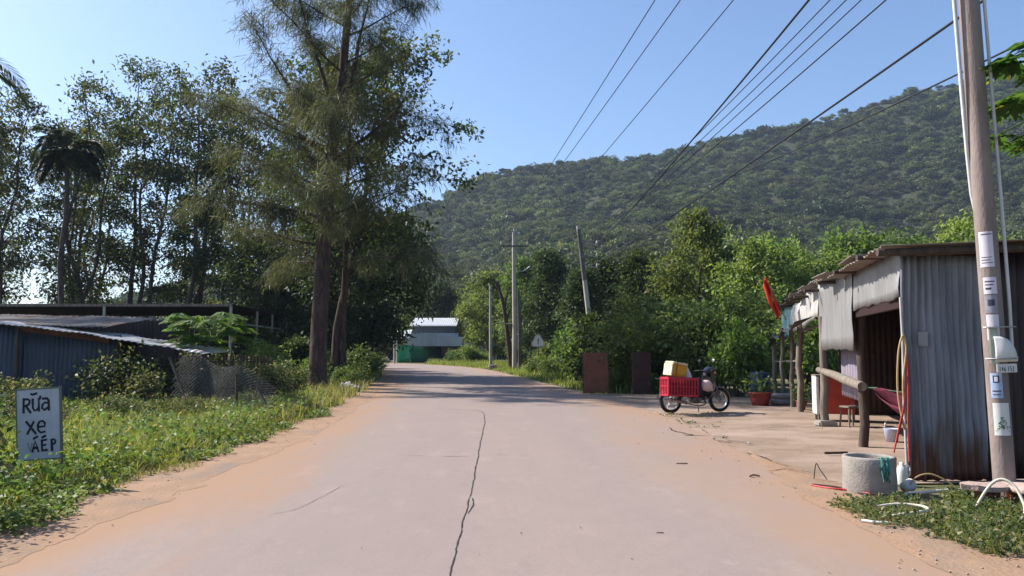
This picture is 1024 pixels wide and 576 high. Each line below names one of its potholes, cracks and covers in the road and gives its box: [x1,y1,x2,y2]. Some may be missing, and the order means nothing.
crack [448,409,485,576]
